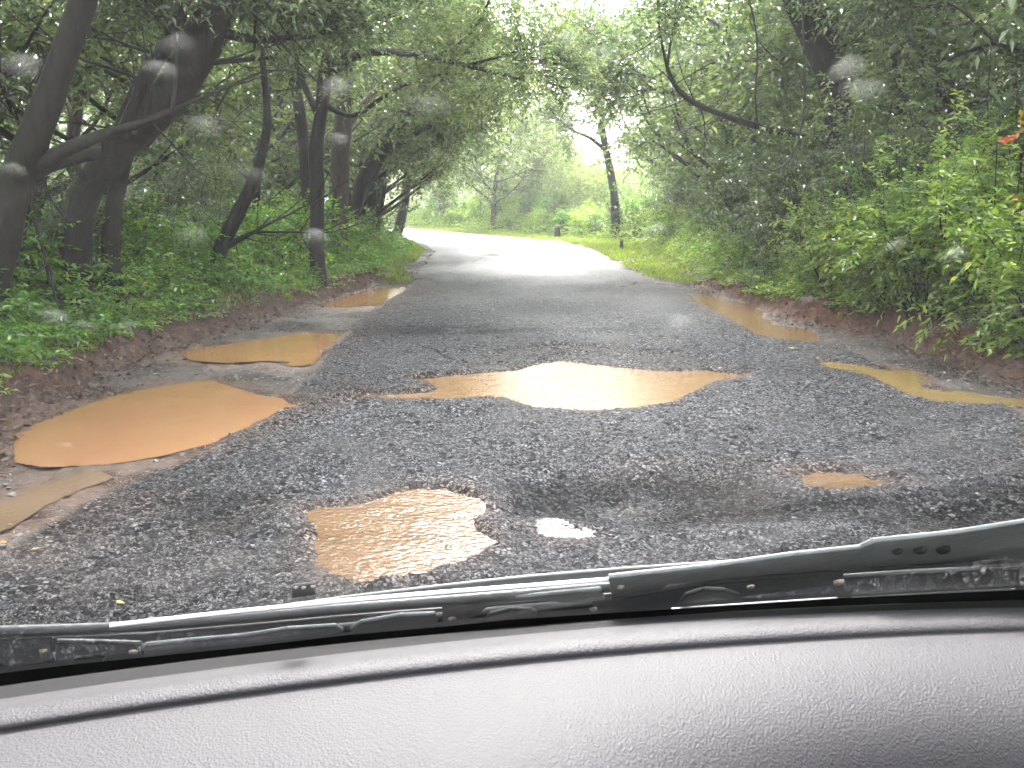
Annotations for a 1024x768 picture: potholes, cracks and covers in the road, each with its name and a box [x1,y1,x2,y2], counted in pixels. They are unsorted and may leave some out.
pothole [292,481,504,583]
pothole [176,332,346,369]
pothole [784,462,911,490]
pothole [328,358,750,411]
pothole [684,292,828,343]
pothole [0,379,319,473]
pothole [0,467,118,538]
pothole [811,357,1024,409]
pothole [309,279,418,309]
